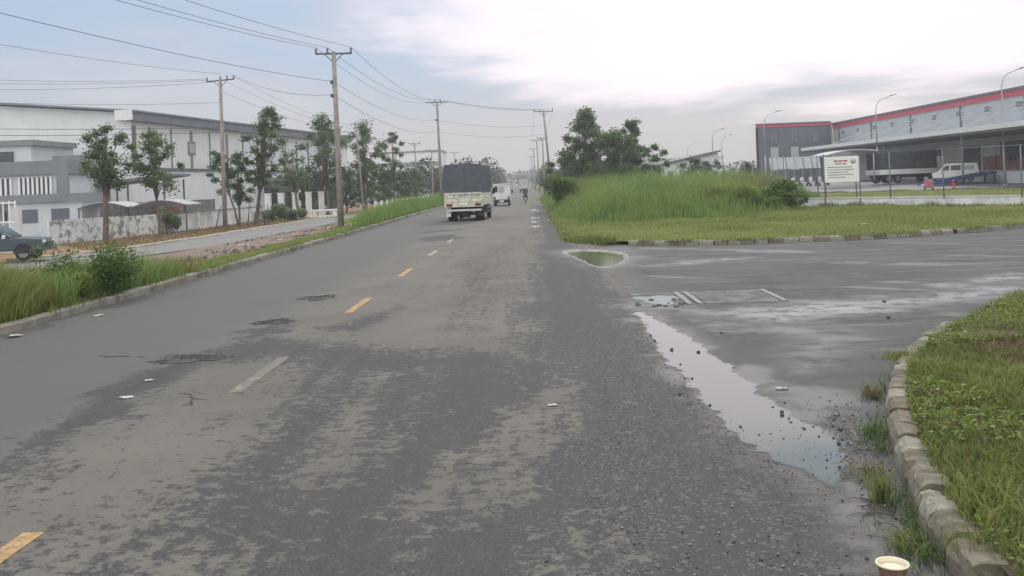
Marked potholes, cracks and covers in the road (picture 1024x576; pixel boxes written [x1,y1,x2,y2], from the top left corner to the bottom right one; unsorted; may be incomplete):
pothole [562,249,629,268]
drain grate [630,289,788,307]
